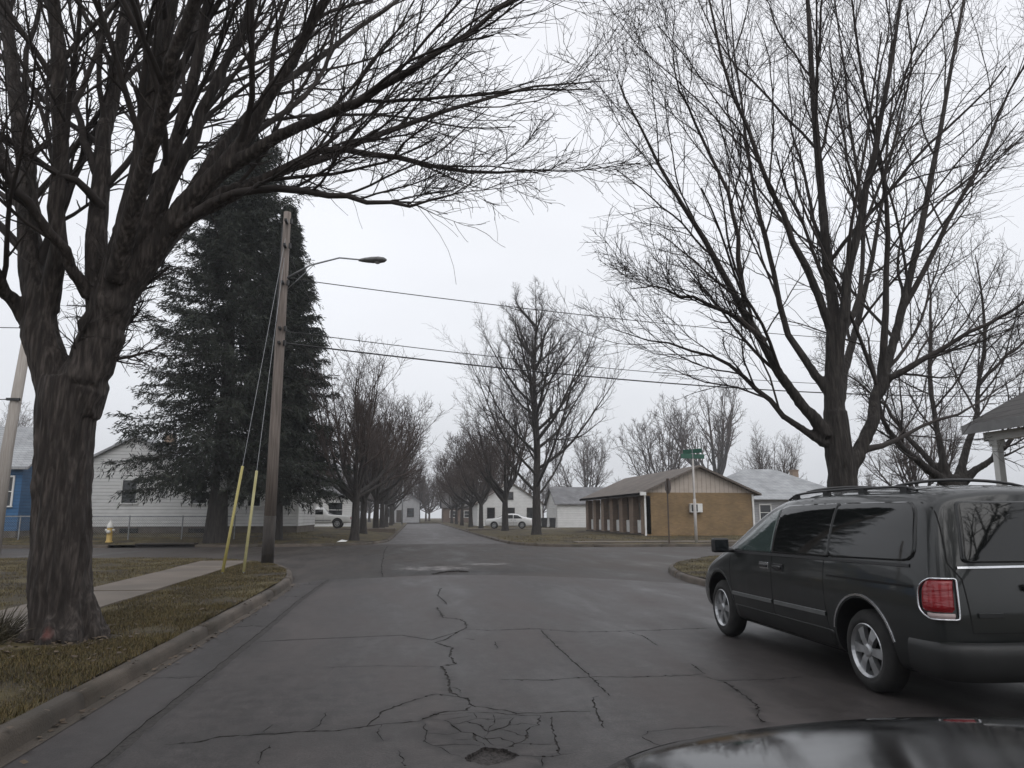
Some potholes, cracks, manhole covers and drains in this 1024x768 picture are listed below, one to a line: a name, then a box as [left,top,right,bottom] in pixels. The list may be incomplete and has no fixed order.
pothole [465,747,520,766]
crack [169,588,795,766]
